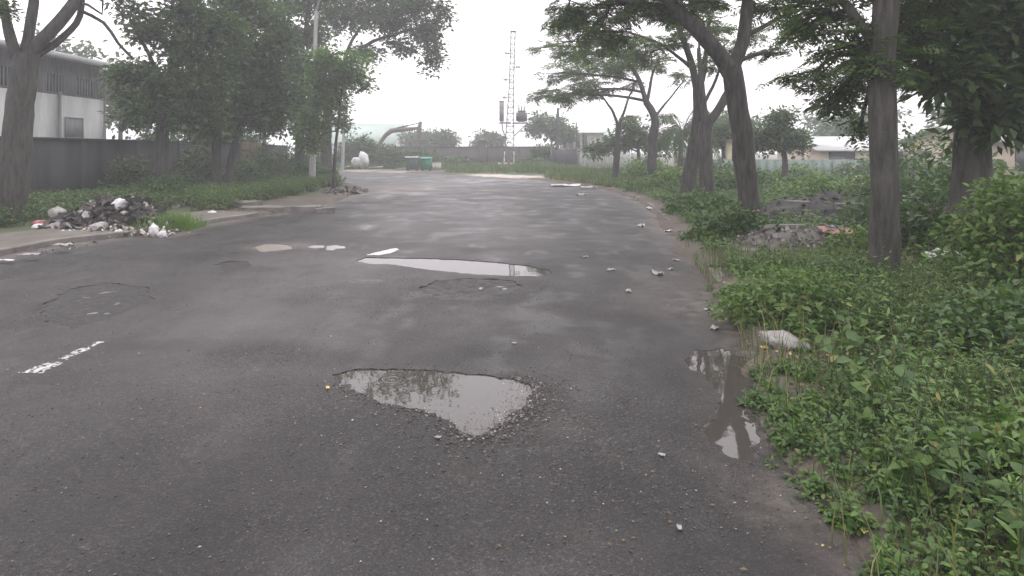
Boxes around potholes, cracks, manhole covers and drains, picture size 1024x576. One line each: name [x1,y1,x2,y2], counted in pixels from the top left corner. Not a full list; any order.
pothole [332,368,533,436]
pothole [357,257,552,276]
